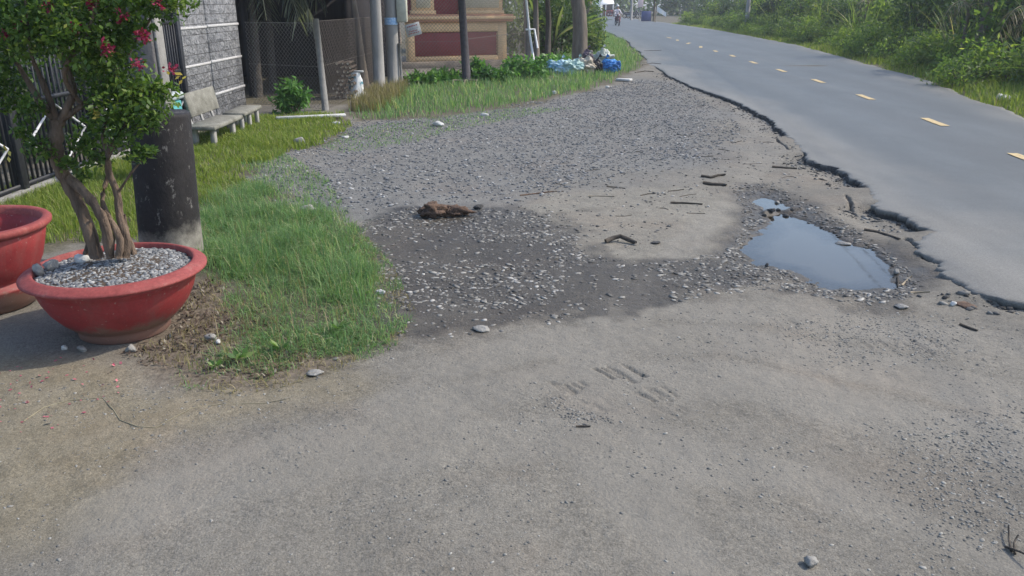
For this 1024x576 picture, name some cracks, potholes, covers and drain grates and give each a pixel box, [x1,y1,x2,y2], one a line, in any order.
pothole [727,191,918,296]
